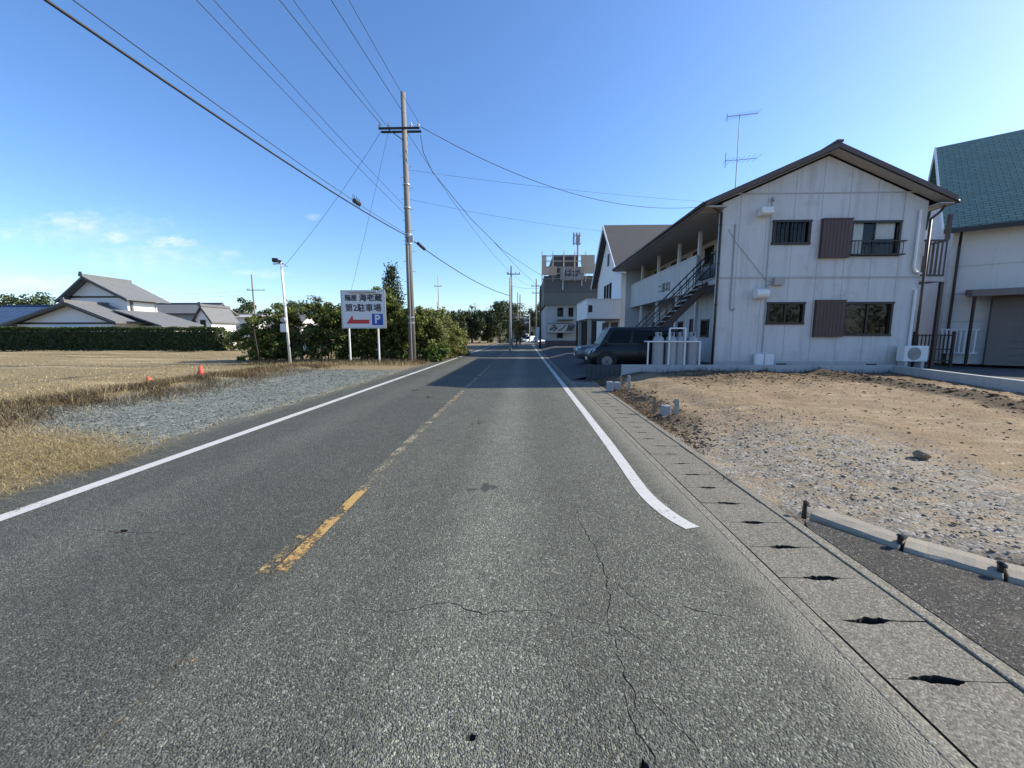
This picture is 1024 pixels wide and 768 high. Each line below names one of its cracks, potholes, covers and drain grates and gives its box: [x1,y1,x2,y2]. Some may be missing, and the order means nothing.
crack [352,504,700,768]
